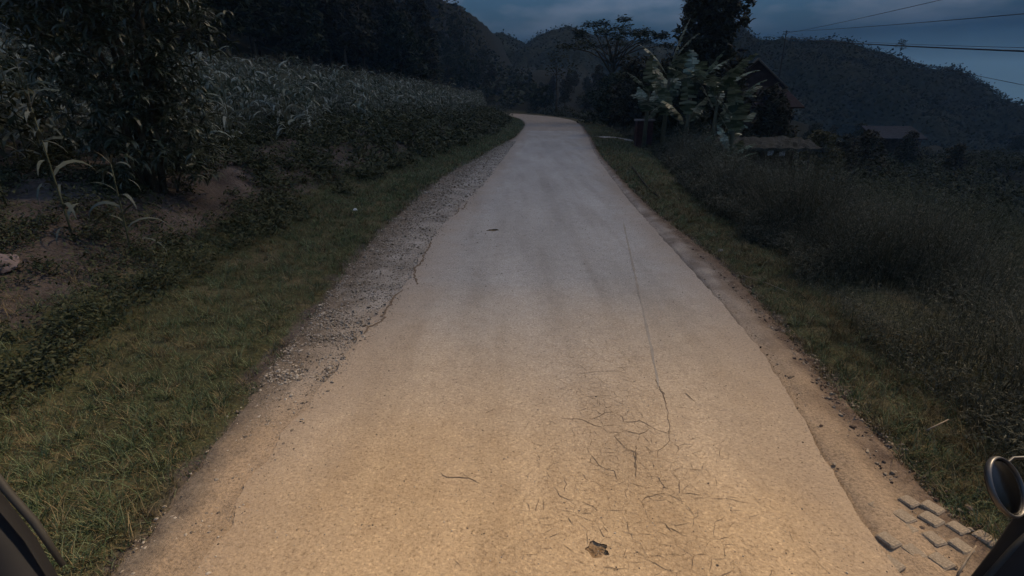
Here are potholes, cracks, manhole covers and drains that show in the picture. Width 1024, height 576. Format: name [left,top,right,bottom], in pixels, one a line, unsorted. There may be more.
crack [364,242,432,333]
crack [456,222,827,576]
pothole [585,540,610,558]
